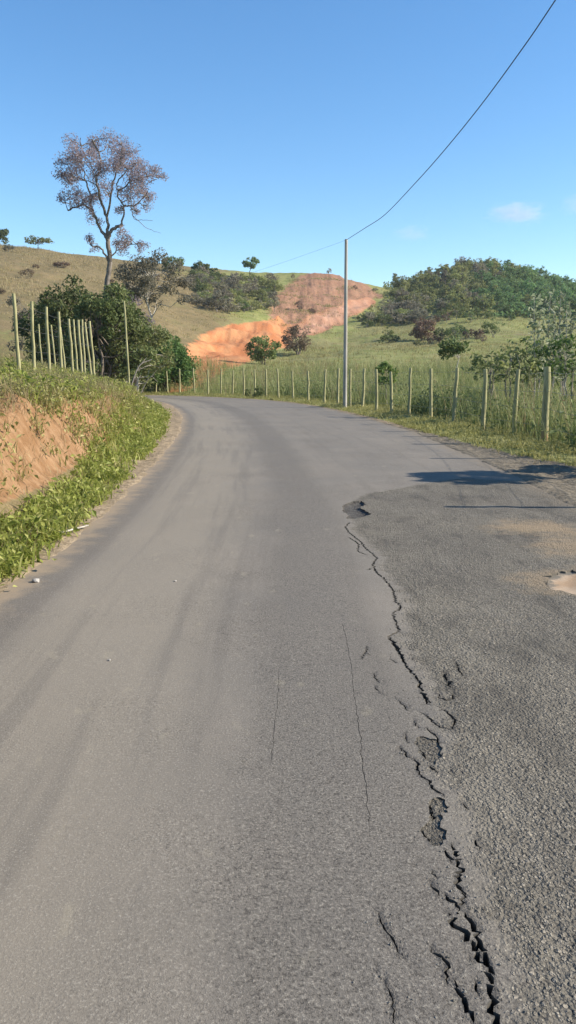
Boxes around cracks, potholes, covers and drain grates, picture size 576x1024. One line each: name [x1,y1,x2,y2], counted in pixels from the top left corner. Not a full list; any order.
crack [344,523,500,1024]
pothole [544,570,576,595]
pothole [421,797,448,846]
pothole [342,501,371,519]
pothole [414,736,443,765]
